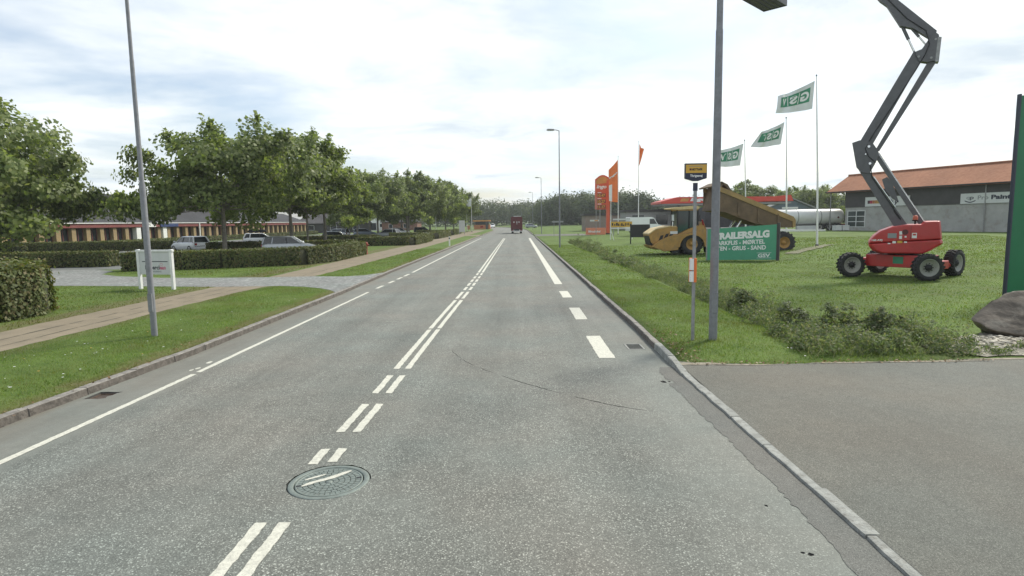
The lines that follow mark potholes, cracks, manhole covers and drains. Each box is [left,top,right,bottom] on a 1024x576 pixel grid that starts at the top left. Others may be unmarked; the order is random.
crack [452,351,640,410]
manhole cover [286,465,371,500]
